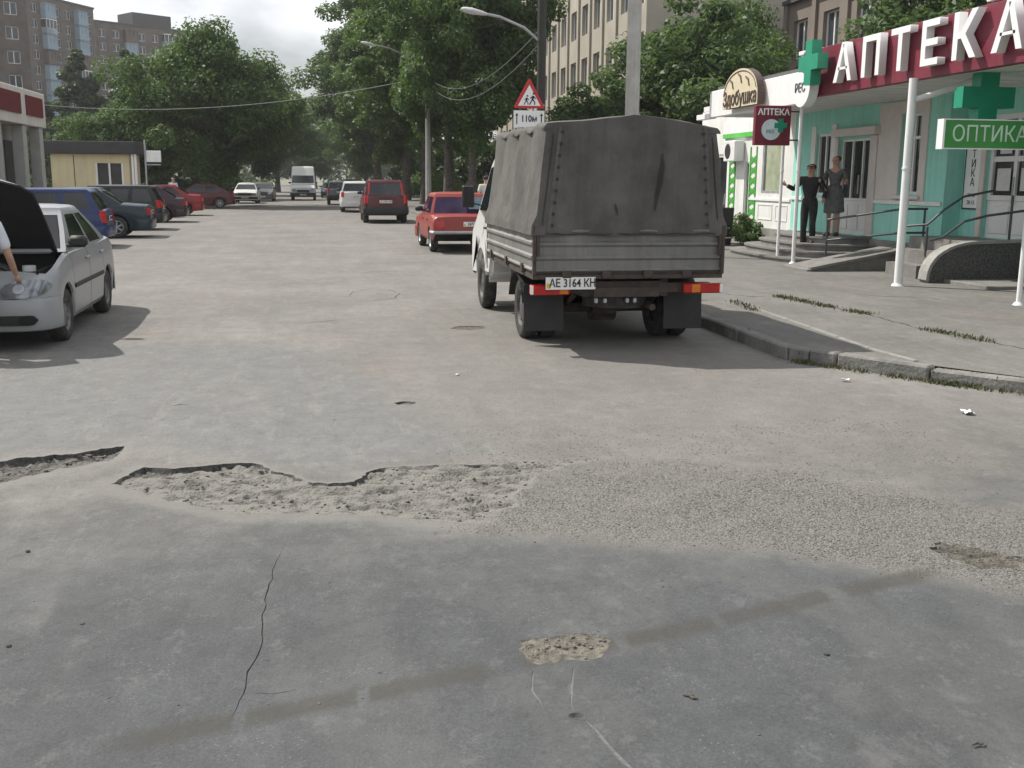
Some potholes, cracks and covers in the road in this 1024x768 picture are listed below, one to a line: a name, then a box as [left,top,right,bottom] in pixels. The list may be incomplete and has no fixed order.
pothole [113,456,606,524]
pothole [0,446,124,483]
pothole [519,633,610,664]
crack [232,553,296,716]
crack [567,668,632,768]
crack [530,671,545,711]
